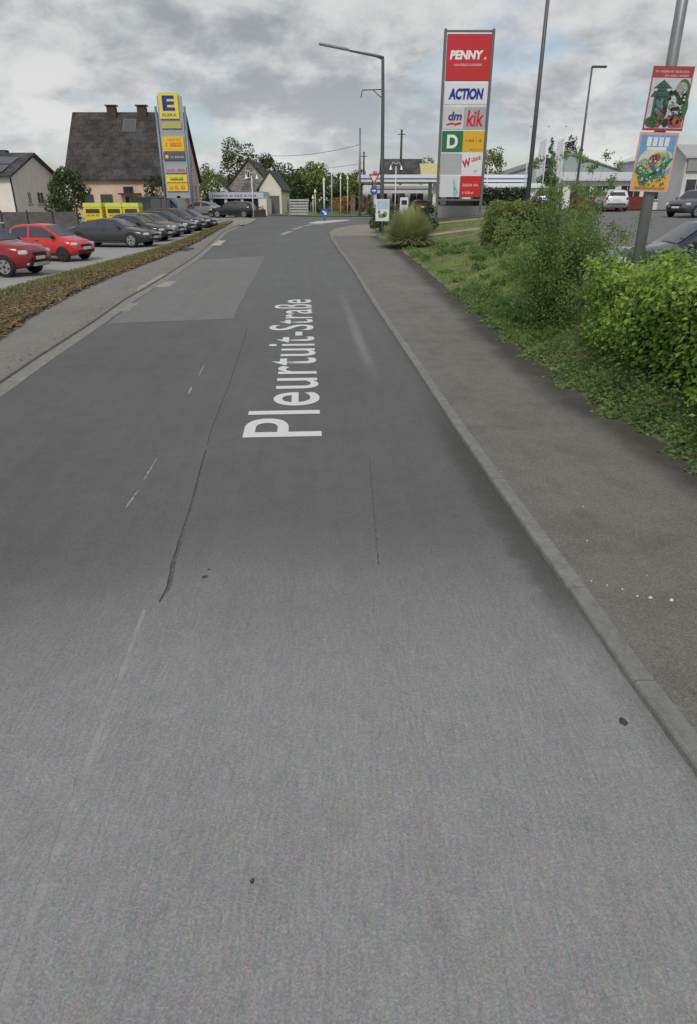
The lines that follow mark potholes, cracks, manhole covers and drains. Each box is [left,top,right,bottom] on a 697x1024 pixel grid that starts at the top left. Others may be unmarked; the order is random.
crack [369,456,379,566]
